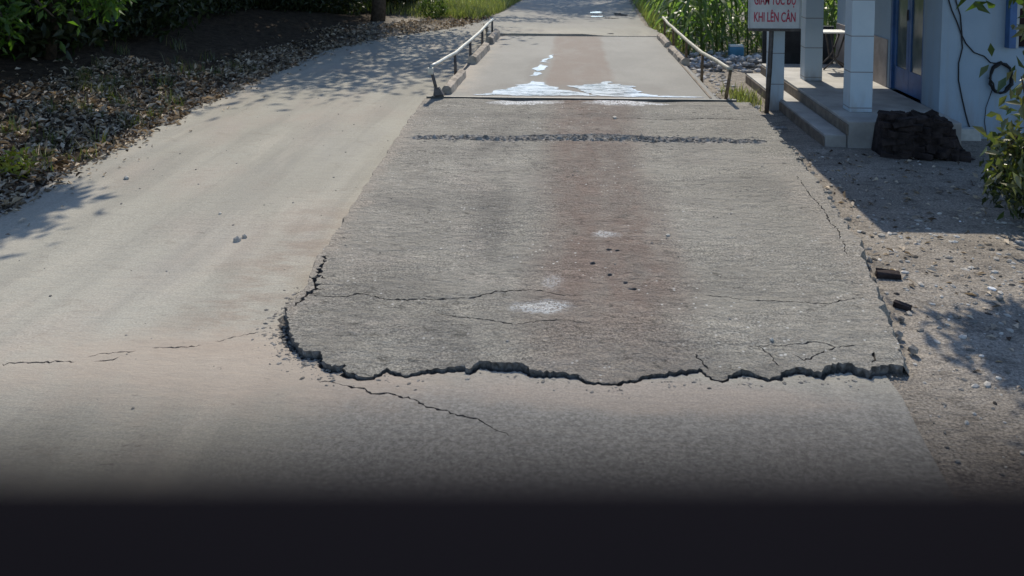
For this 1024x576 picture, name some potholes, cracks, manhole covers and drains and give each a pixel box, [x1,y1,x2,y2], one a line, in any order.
crack [3,255,903,431]
crack [797,176,847,254]
